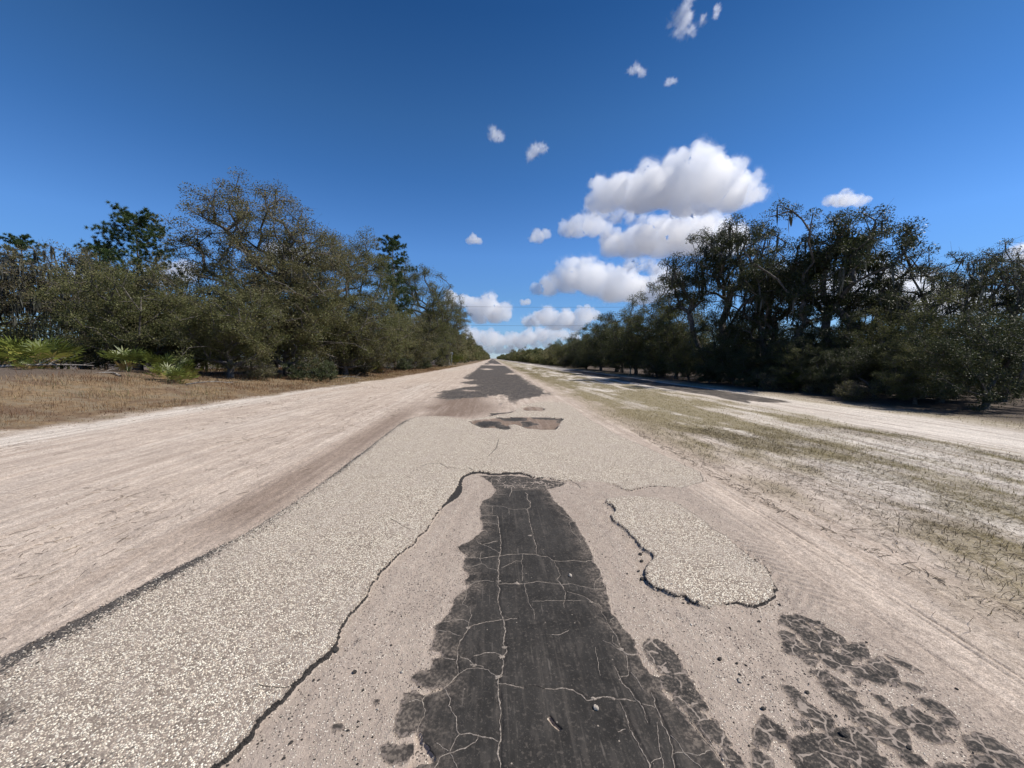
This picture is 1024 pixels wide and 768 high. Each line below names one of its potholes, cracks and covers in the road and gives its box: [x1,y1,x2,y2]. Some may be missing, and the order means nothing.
crack [409,485,725,768]
